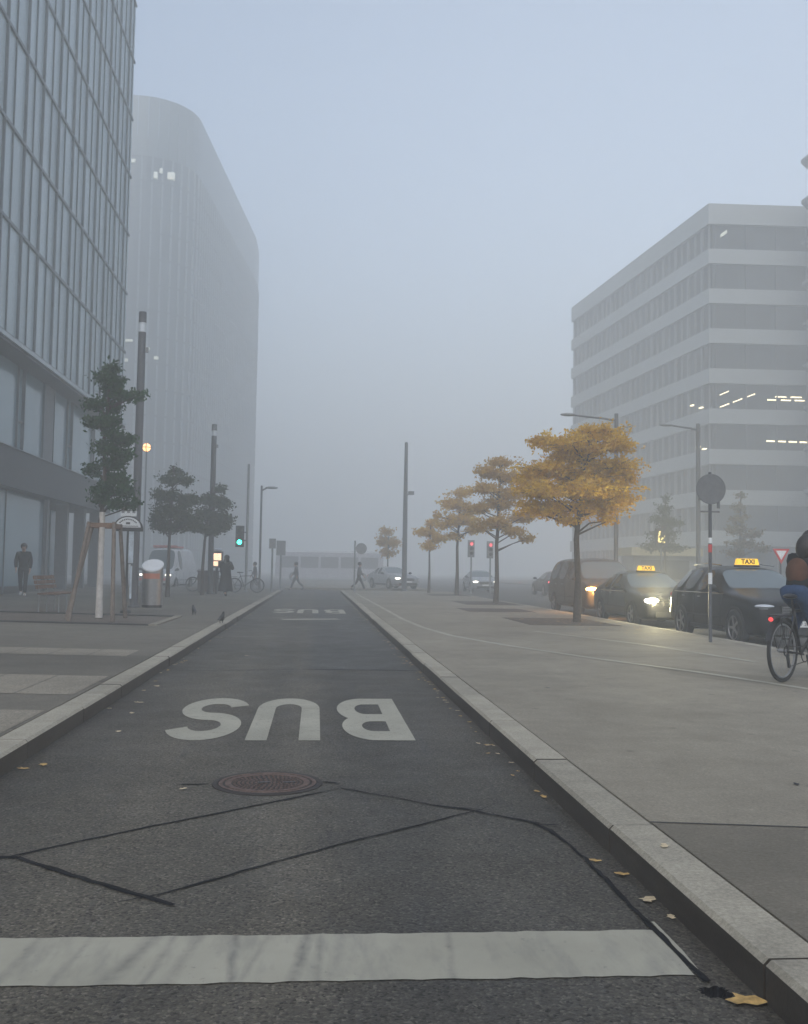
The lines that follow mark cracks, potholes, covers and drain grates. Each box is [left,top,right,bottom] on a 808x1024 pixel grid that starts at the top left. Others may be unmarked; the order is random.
manhole cover [212,771,323,796]
